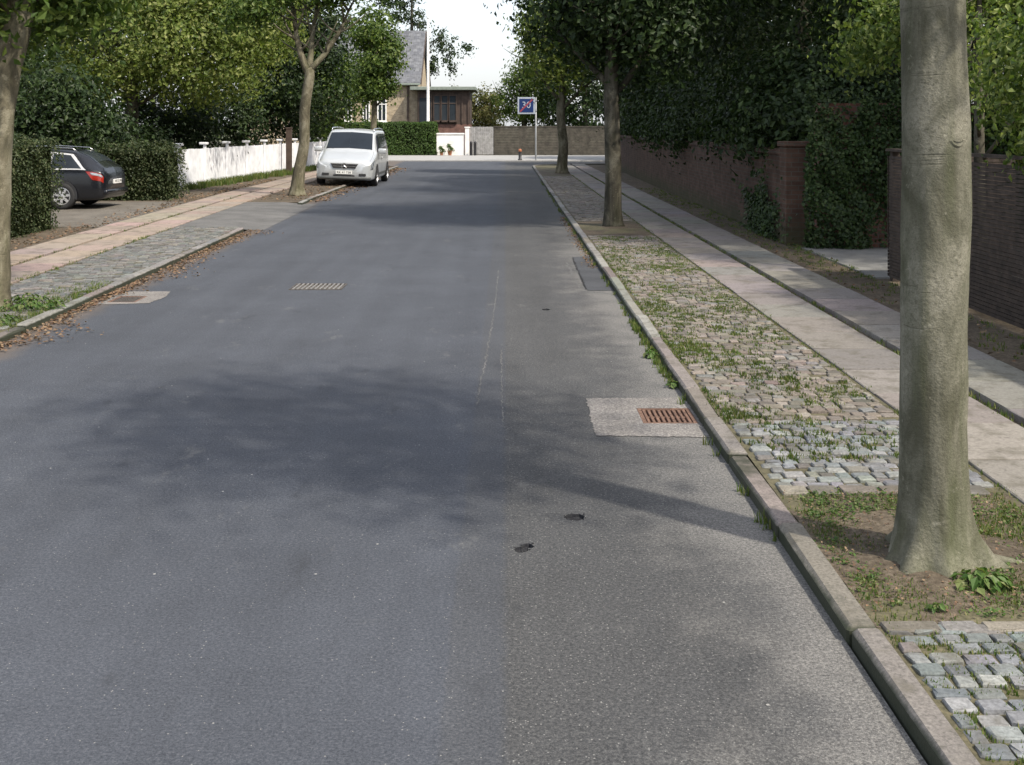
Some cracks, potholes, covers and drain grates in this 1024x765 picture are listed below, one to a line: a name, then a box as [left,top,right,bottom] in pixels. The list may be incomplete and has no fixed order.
pothole [564,512,586,521]
pothole [514,543,534,553]
crack [476,270,504,422]
drain grate [637,408,698,423]
